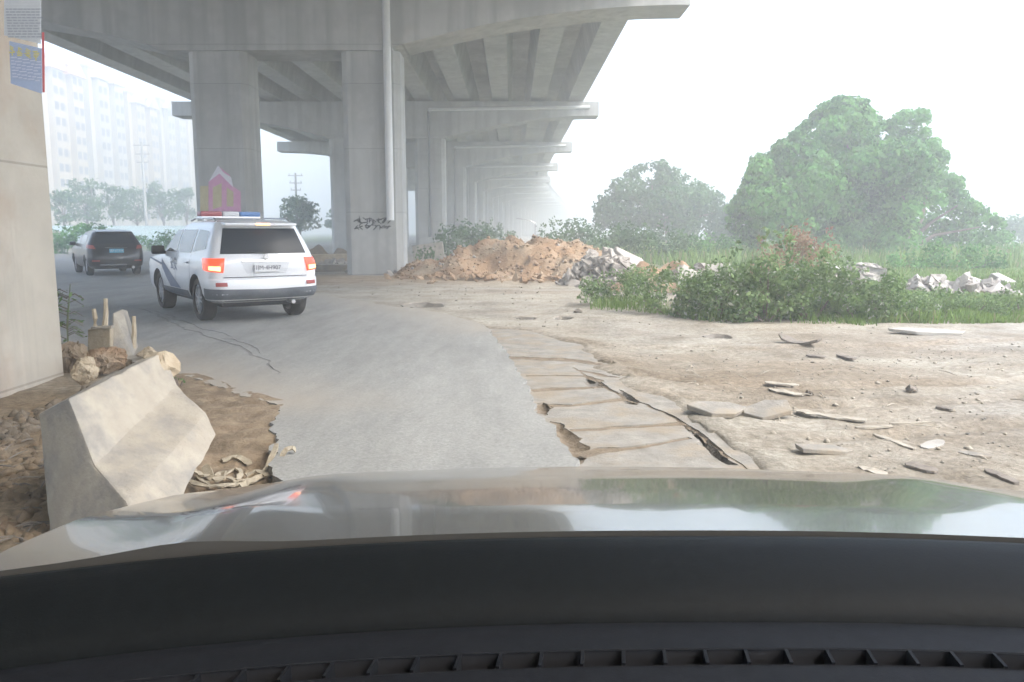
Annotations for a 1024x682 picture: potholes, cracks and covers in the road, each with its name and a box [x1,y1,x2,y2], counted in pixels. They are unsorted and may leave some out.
crack [509,356,746,469]
pothole [536,404,554,416]
pothole [549,422,590,465]
crack [123,306,280,374]
